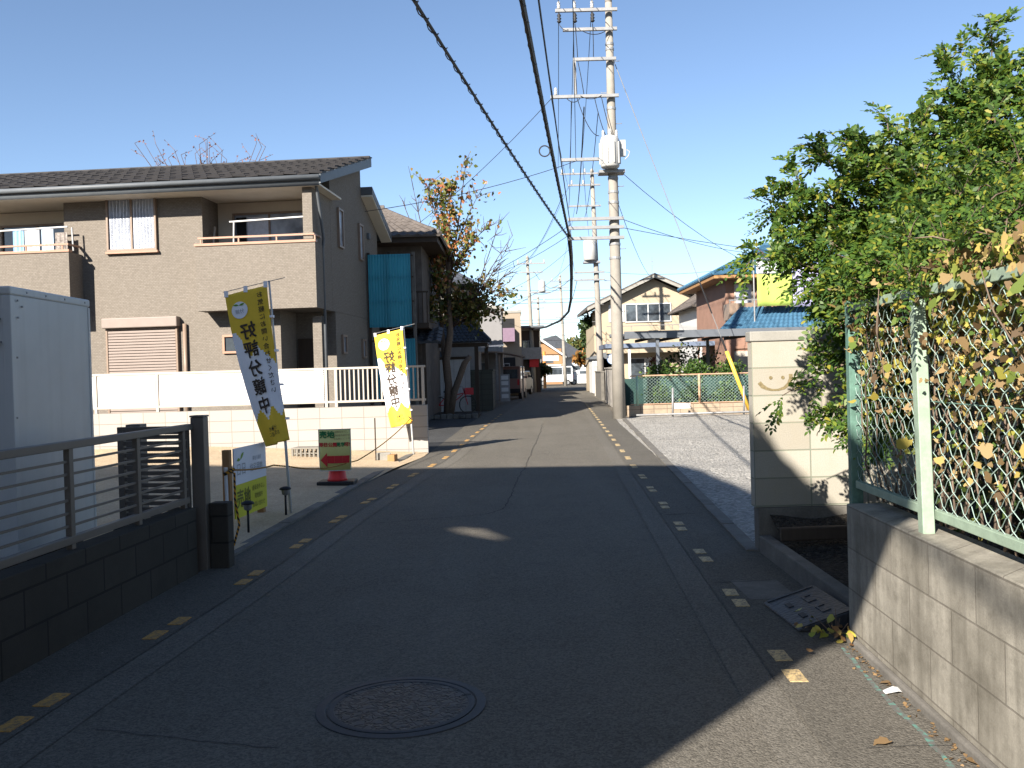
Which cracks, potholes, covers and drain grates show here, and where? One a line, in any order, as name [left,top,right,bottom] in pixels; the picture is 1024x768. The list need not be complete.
manhole cover [315,676,486,739]
crack [381,425,543,523]
